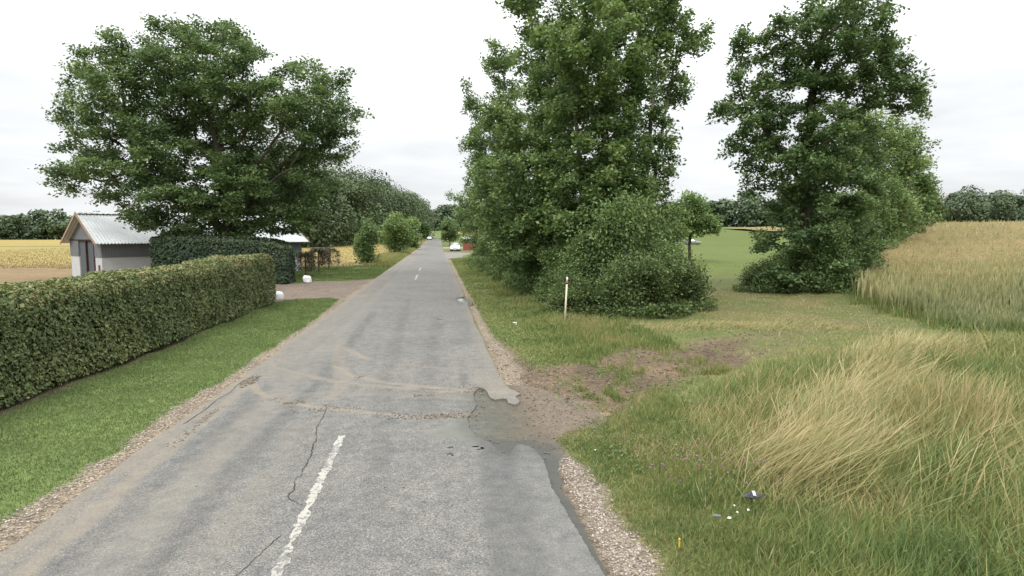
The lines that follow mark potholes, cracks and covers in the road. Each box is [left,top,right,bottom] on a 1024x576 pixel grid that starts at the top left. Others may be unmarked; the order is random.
crack [285,406,327,504]
